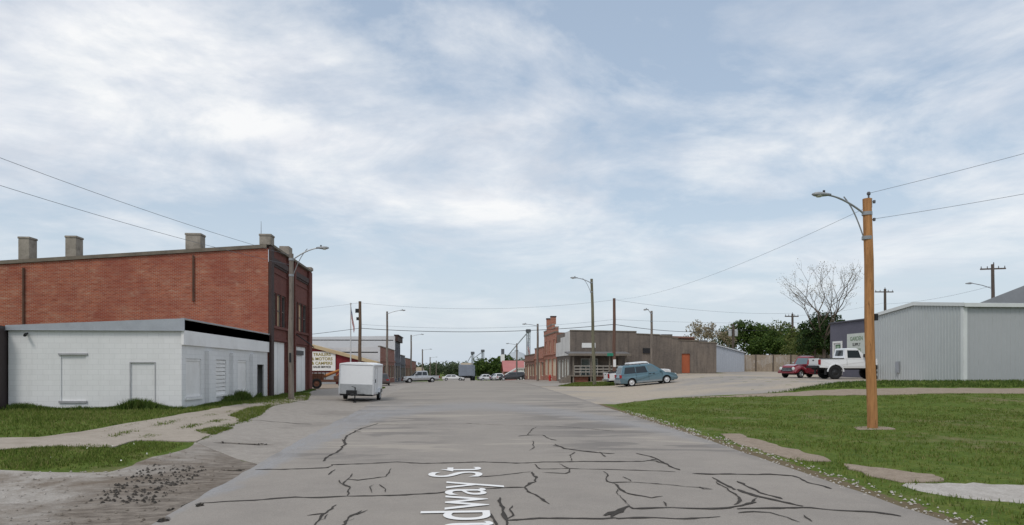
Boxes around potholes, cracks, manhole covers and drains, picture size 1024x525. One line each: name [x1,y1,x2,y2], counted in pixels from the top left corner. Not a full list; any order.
crack [204,423,901,525]
